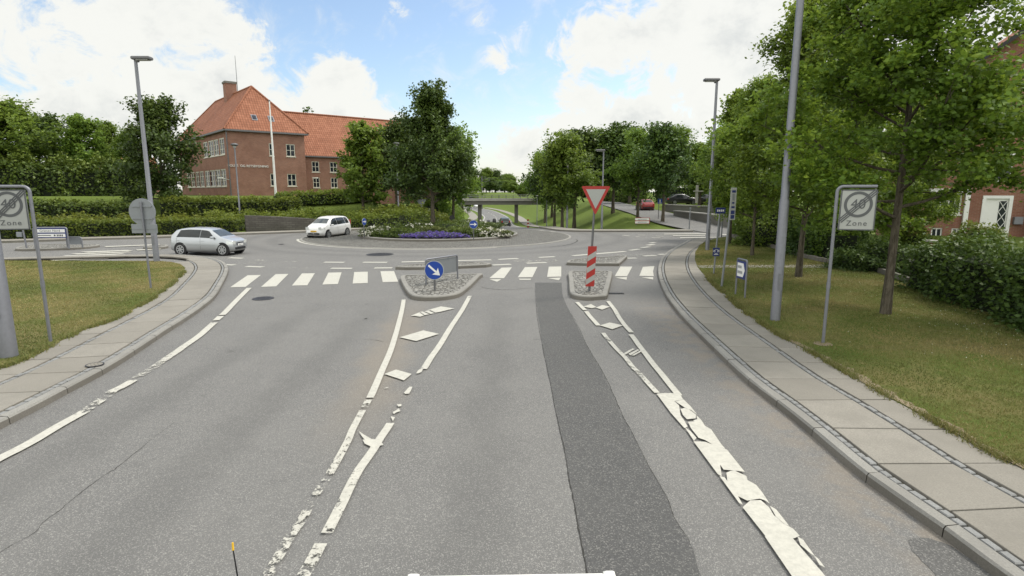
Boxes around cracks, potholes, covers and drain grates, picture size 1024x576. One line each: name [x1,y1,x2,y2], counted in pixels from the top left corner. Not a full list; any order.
crack [1,423,173,552]
